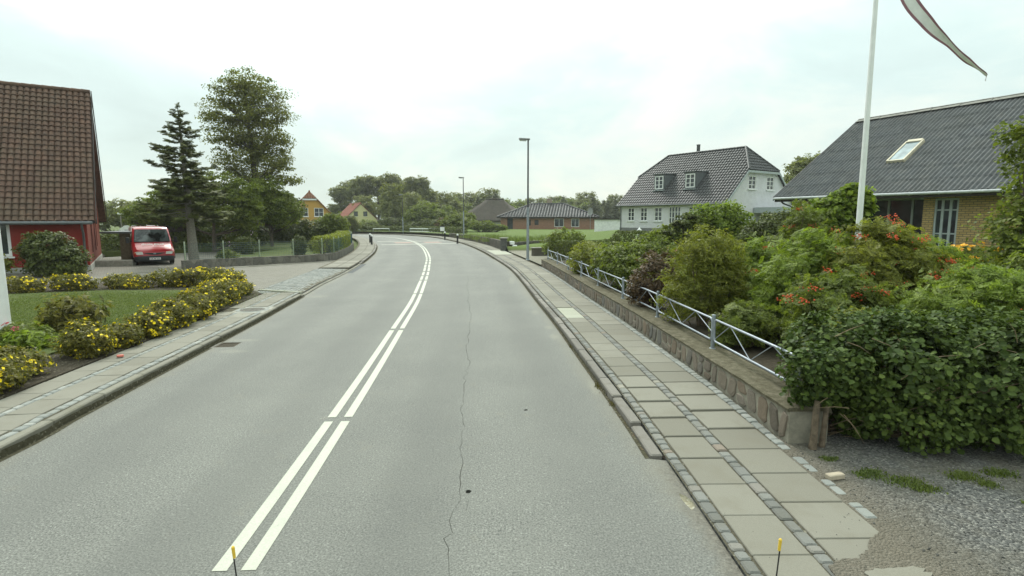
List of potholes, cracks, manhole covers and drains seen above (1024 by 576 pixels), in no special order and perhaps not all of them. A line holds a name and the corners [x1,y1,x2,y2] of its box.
crack [436,276,471,564]
